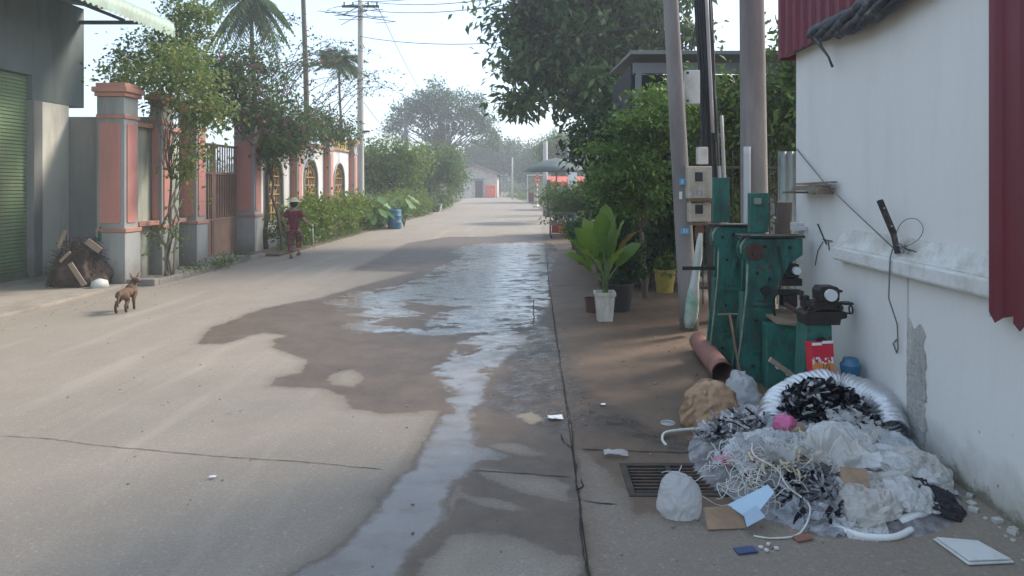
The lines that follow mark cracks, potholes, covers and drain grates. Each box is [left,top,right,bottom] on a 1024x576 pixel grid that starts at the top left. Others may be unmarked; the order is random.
drain grate [619,463,729,497]
